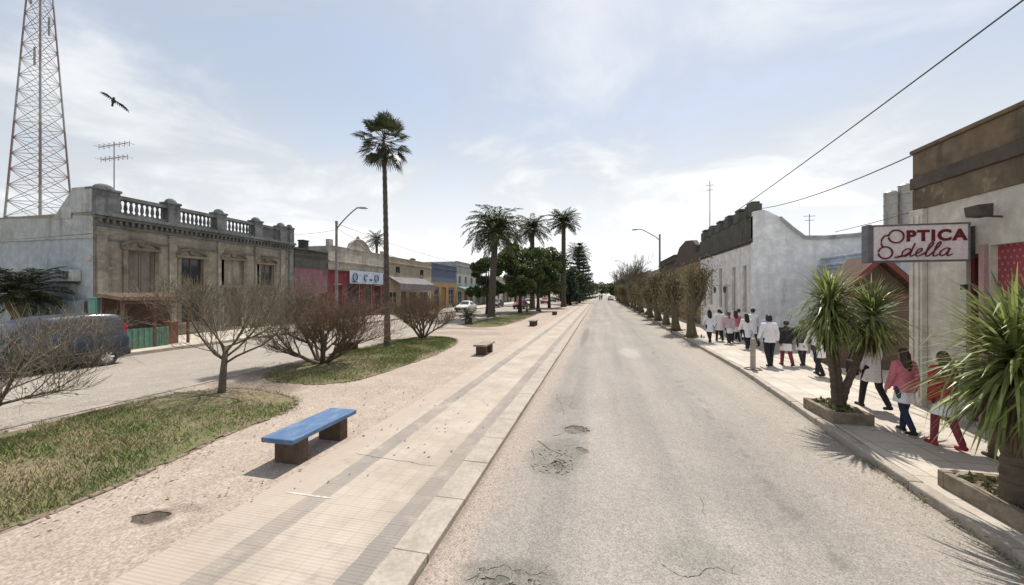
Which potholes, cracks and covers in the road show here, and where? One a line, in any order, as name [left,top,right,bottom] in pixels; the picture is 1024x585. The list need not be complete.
crack [661,564,738,578]
crack [466,565,550,585]
pothole [564,425,590,434]
pothole [130,511,172,524]
